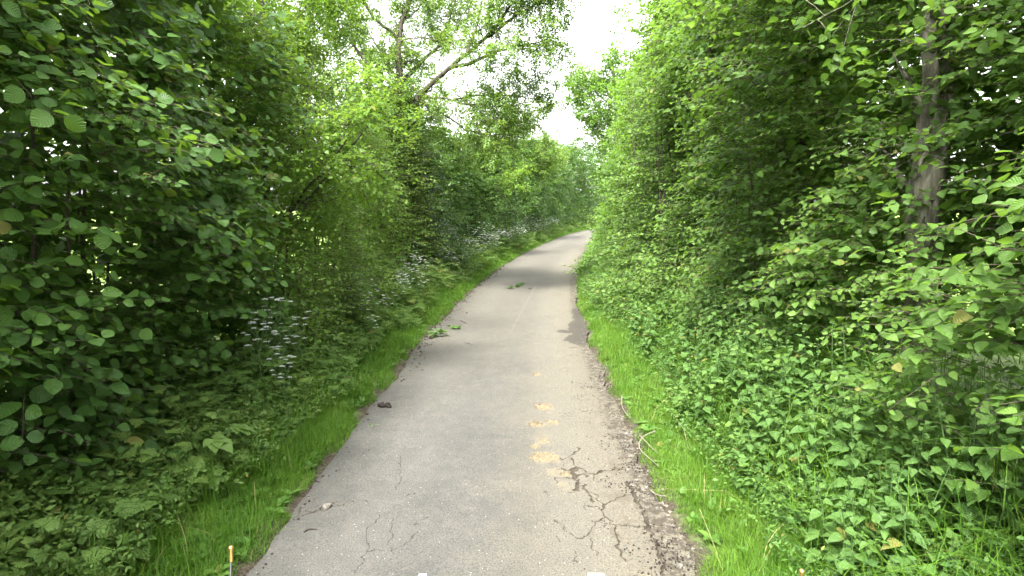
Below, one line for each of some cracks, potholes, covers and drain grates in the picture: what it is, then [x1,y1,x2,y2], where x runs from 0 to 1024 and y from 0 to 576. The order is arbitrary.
crack [291,456,428,573]
crack [552,447,667,576]
